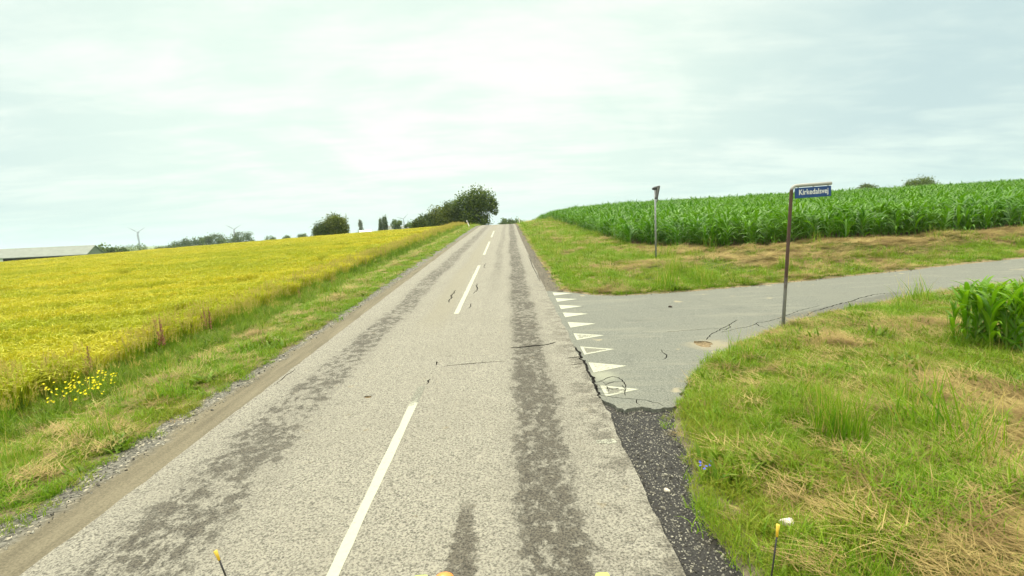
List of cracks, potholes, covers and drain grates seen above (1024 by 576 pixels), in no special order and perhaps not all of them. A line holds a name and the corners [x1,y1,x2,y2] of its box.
crack [593,376,663,406]
crack [669,293,910,340]
crack [427,342,582,384]
